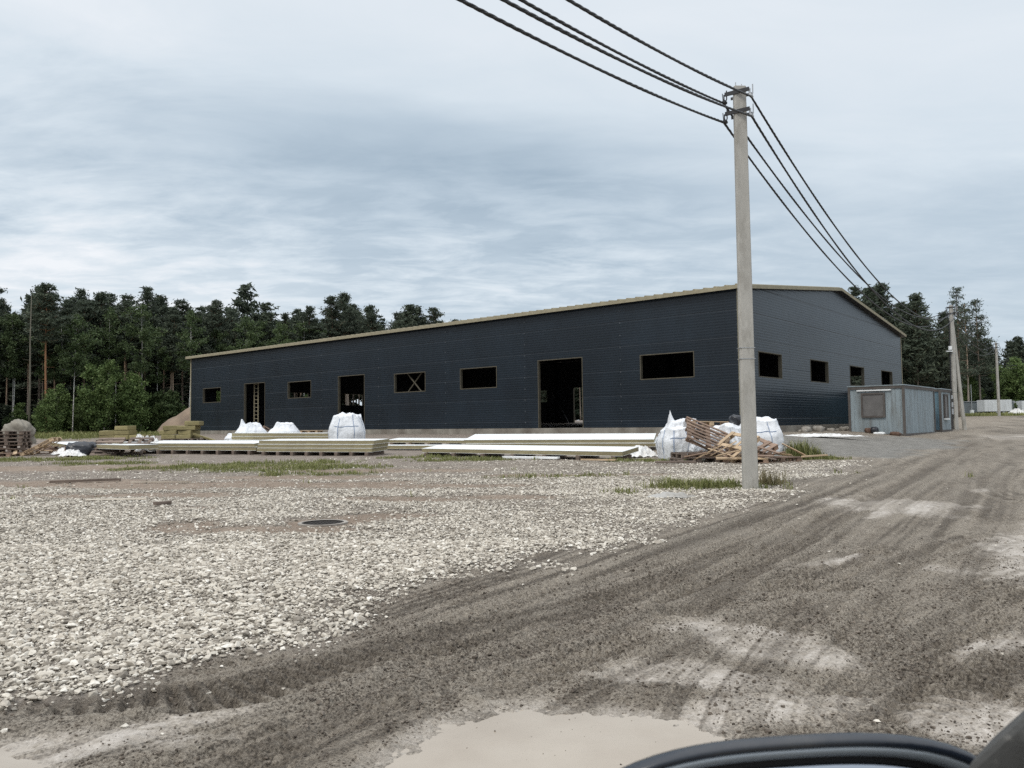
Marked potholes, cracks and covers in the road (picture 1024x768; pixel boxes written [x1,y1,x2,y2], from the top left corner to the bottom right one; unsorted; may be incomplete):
manhole cover [298,519,348,527]
